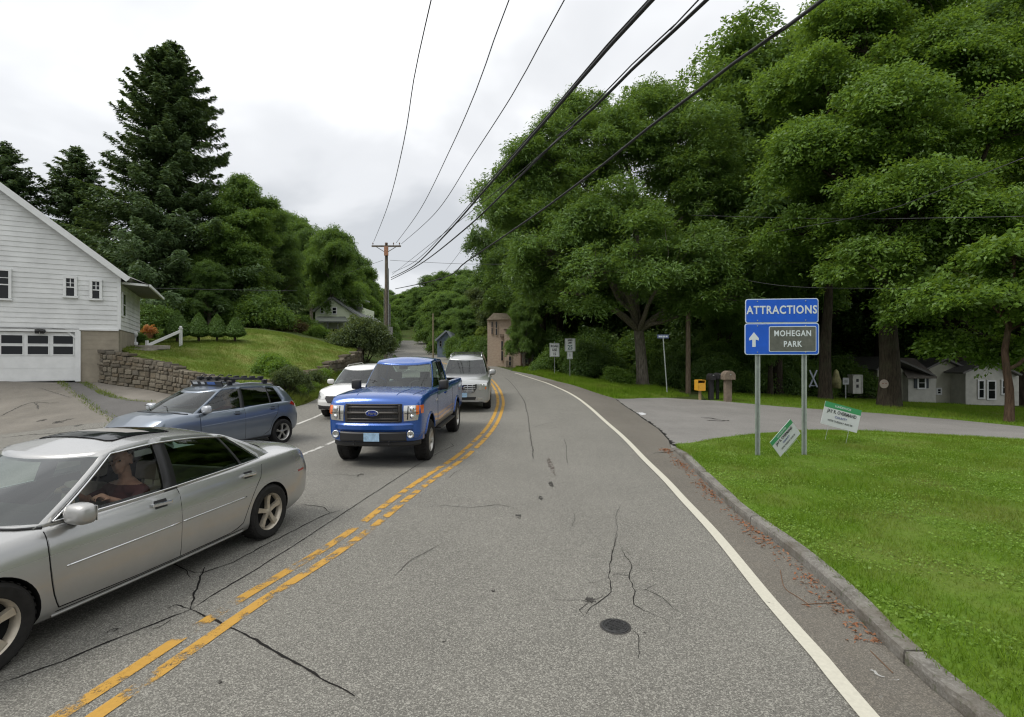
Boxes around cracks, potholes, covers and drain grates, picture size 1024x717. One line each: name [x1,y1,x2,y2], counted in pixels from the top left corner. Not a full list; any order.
manhole cover [600,618,631,635]
crack [2,389,71,416]
crack [558,504,680,657]
